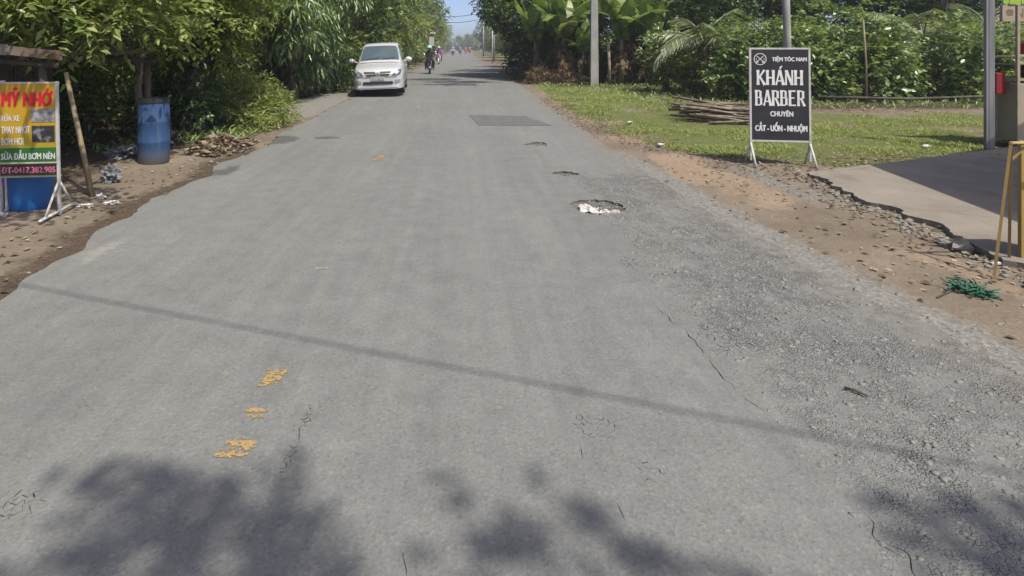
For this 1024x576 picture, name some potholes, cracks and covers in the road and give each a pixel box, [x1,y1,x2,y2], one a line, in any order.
crack [871,520,915,576]
pothole [570,199,626,215]
crack [280,405,314,473]
crack [663,313,758,407]
